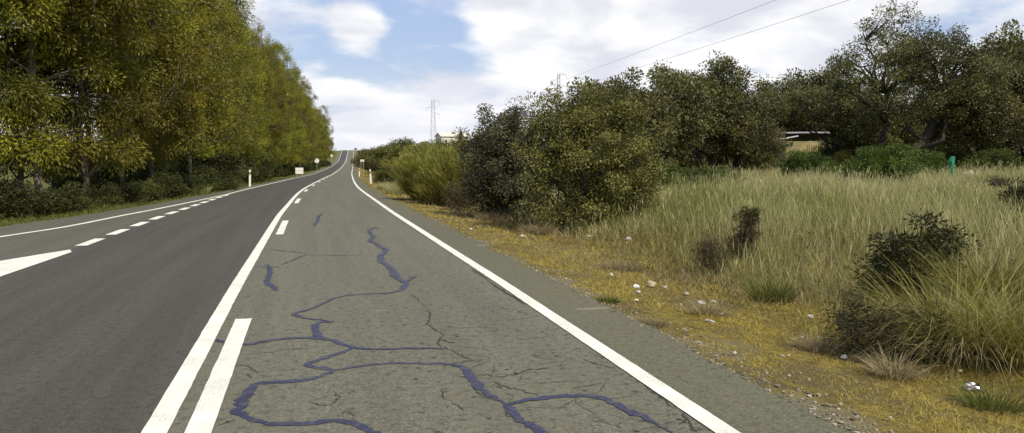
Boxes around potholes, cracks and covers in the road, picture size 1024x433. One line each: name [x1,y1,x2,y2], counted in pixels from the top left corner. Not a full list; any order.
crack [472,269,525,305]
crack [411,294,697,432]
